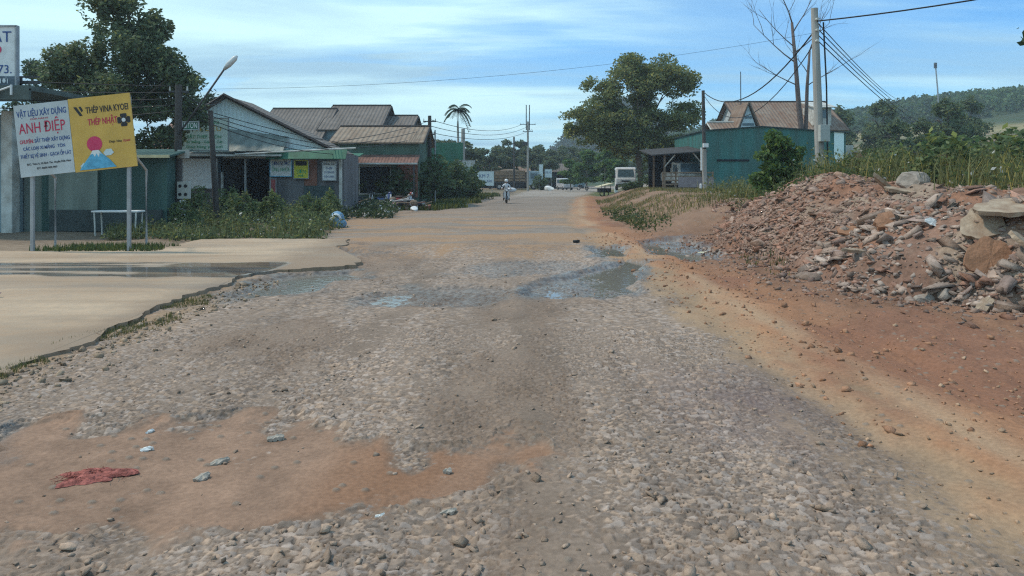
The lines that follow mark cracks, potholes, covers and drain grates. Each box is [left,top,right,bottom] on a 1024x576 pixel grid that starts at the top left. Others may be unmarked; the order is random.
pothole [636,236,731,262]
pothole [586,244,633,257]
pothole [517,258,654,299]
pothole [354,282,519,308]
pothole [445,260,594,278]
